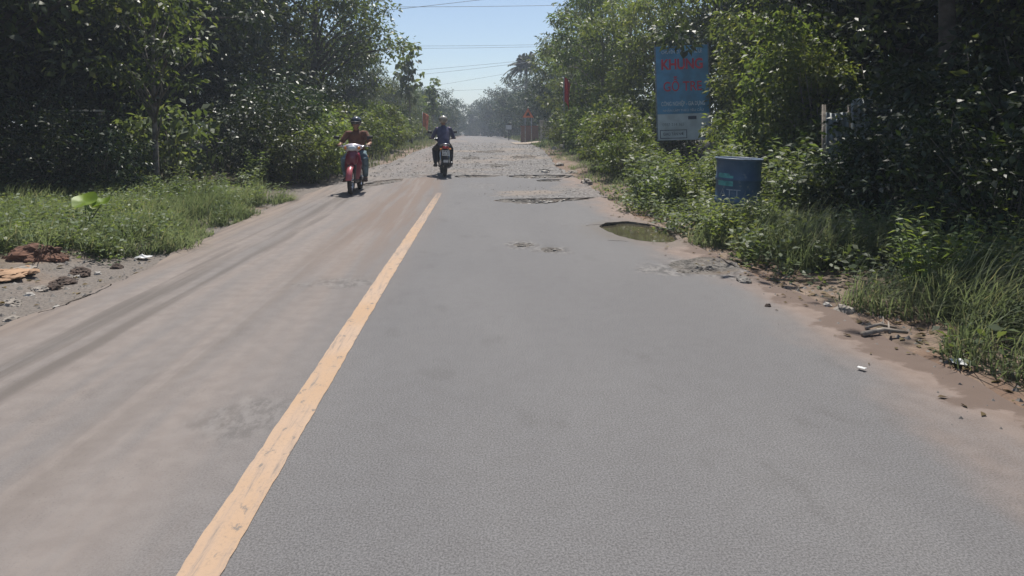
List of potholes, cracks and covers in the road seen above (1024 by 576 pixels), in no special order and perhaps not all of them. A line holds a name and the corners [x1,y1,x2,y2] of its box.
pothole [599,221,678,242]
pothole [668,257,740,275]
